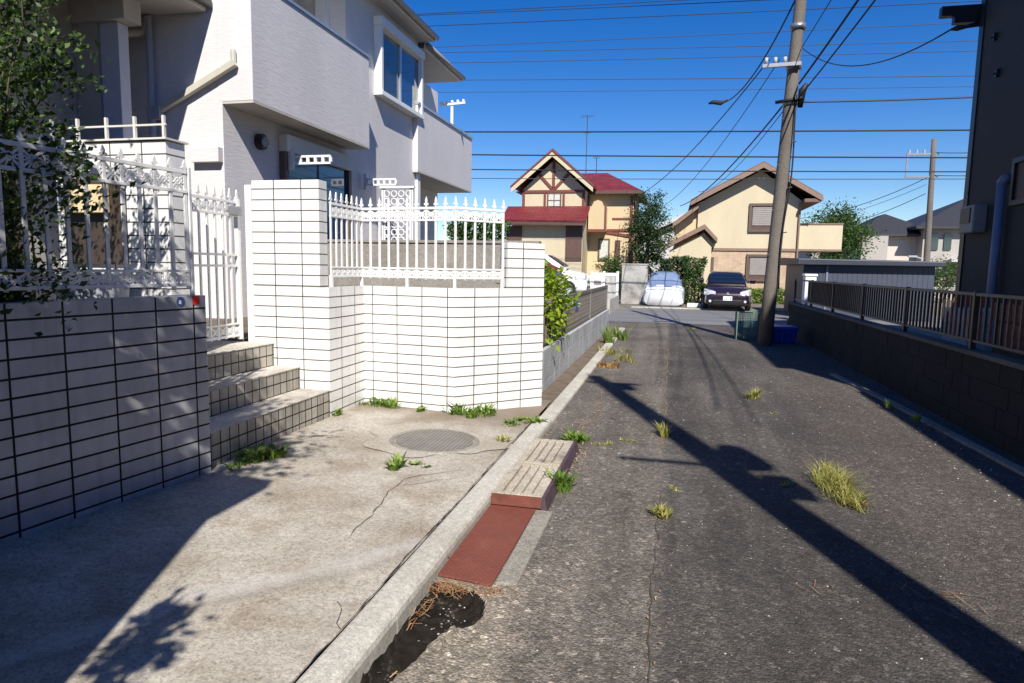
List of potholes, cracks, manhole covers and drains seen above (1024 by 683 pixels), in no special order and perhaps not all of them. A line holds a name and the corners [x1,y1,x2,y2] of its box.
crack [350,469,465,536]
crack [647,495,661,683]
crack [661,348,669,450]
manhole cover [389,429,480,454]
